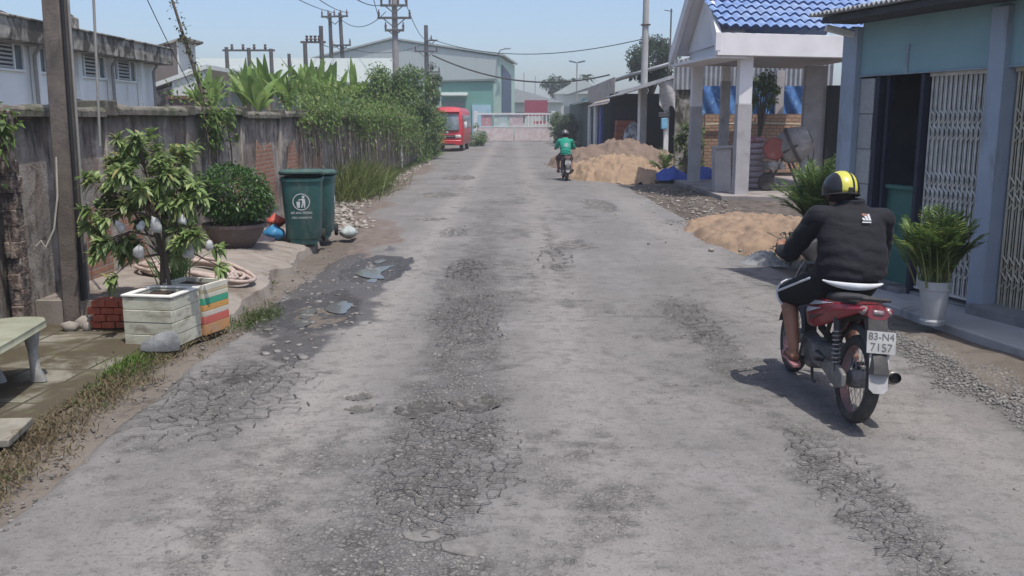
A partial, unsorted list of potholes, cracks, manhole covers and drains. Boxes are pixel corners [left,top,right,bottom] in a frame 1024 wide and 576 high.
crack [782,427,955,576]
pothole [342,404,374,414]
pothole [393,399,445,418]
crack [123,358,324,441]
pothole [345,392,373,401]
crack [371,404,527,541]
pothole [338,255,414,283]
pothole [448,397,501,412]
